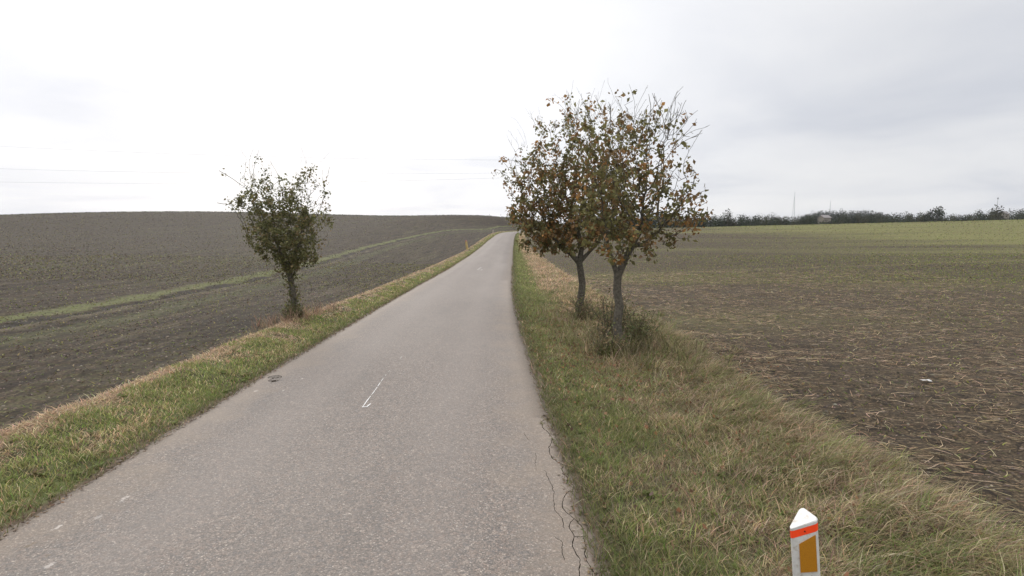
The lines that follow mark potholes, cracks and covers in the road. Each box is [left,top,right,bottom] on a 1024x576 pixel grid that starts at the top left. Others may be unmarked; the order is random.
crack [525,419,598,576]
